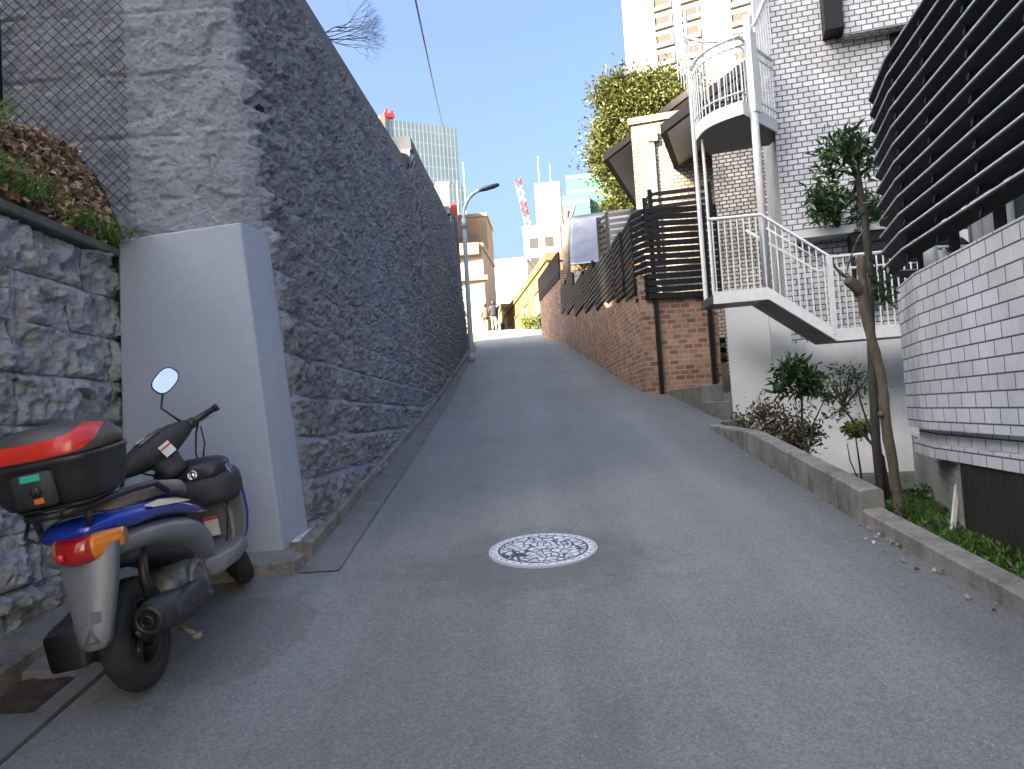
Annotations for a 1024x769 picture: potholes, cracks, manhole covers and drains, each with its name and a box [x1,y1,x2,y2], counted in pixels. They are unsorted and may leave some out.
manhole cover [489,533,598,569]
